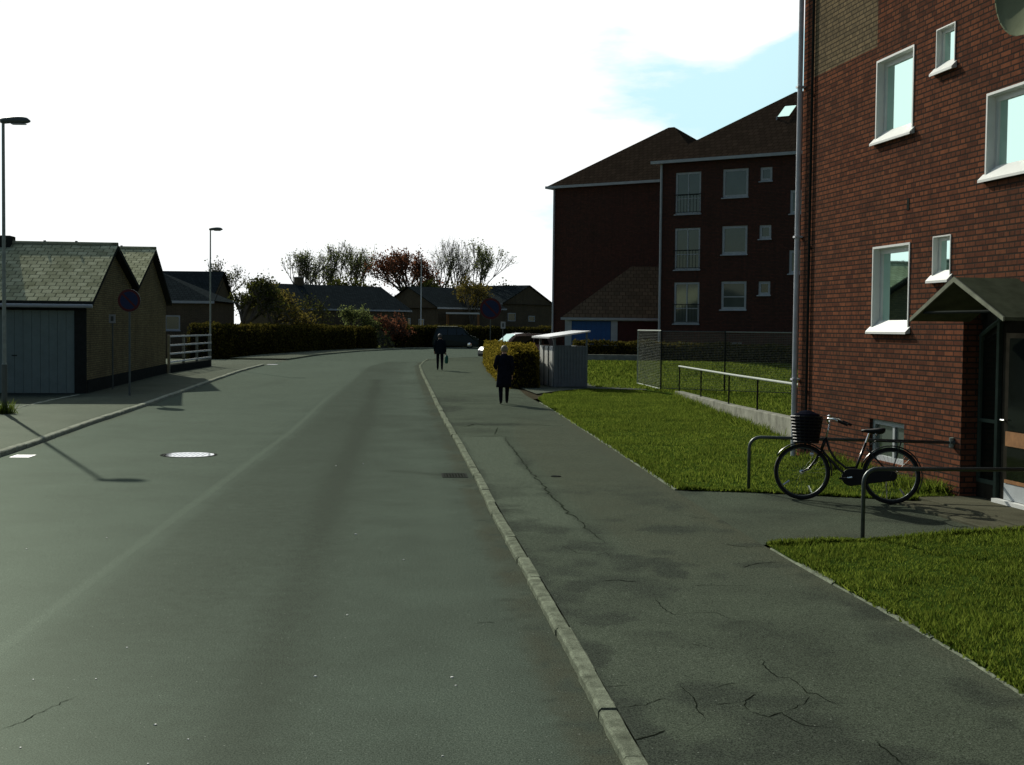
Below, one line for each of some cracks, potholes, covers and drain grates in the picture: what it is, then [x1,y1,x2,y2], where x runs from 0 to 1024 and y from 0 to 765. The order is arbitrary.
crack [632,659,842,729]
